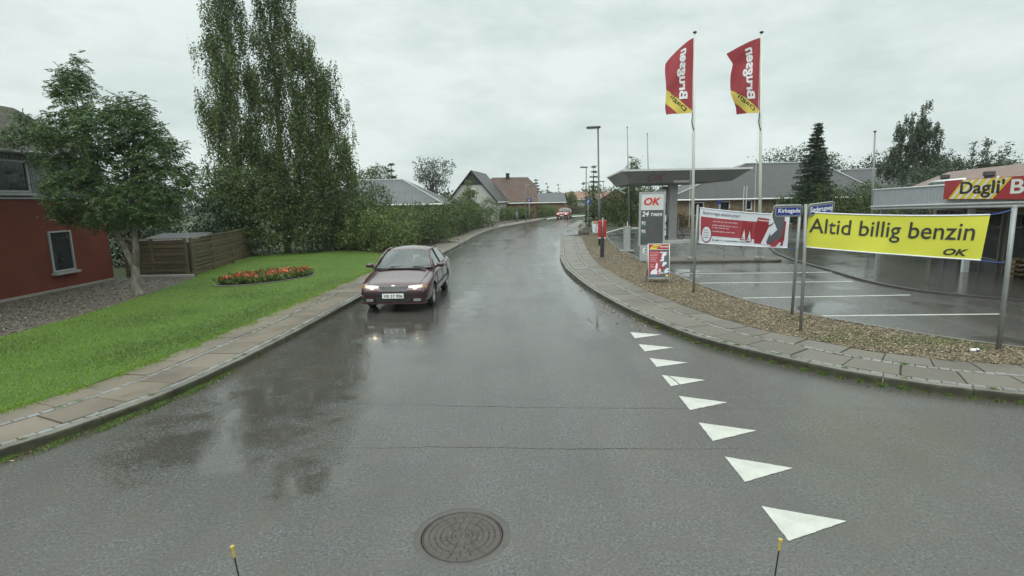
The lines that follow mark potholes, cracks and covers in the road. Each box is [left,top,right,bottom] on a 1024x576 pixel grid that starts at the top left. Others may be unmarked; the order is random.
manhole cover [413,508,510,568]
